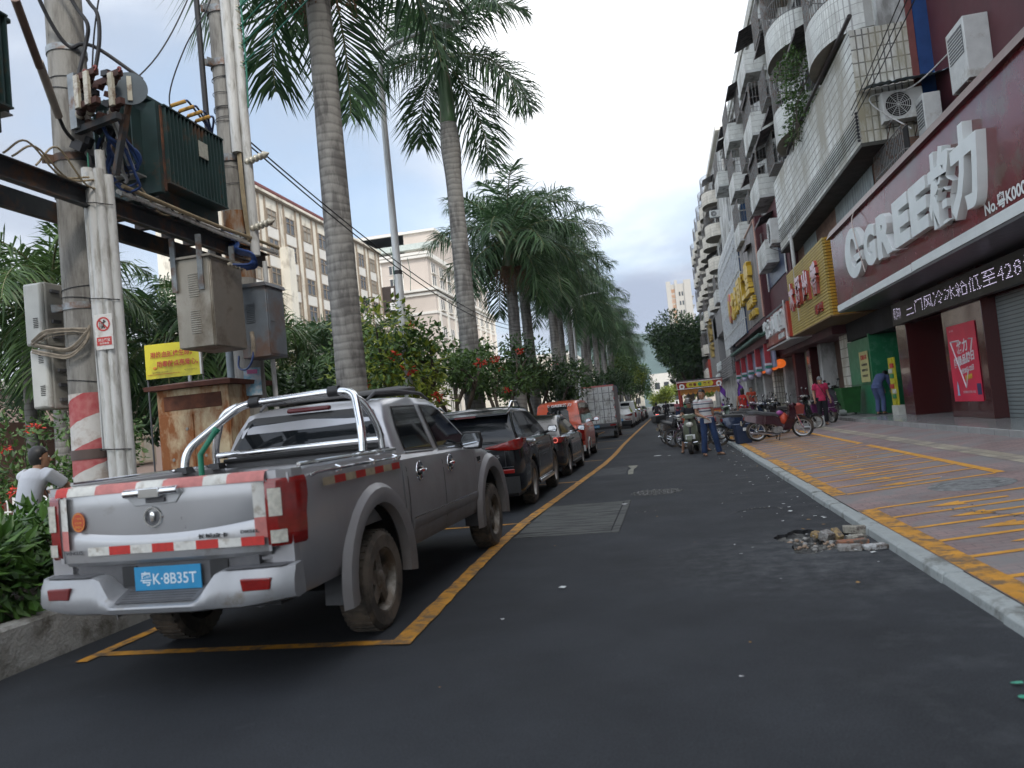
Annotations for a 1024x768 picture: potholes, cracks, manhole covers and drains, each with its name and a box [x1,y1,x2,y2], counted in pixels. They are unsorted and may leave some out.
pothole [774,529,852,554]
